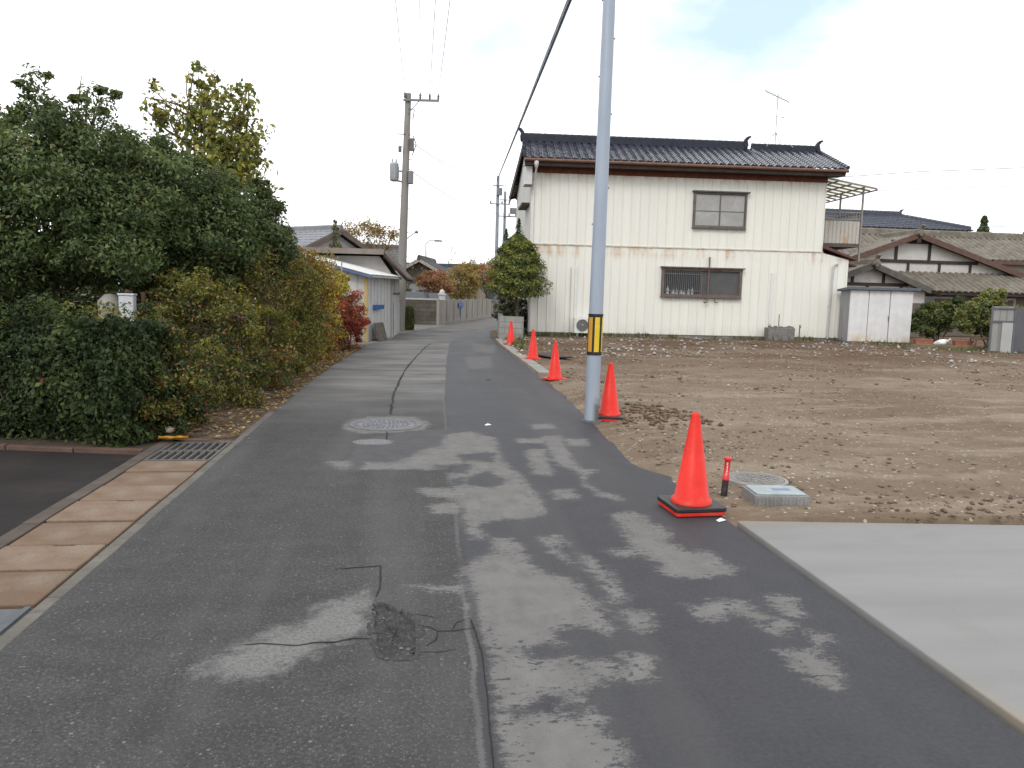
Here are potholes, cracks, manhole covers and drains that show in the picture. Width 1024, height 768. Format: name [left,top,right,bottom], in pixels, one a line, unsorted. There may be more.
drain grate [143,441,232,463]
manhole cover [348,418,422,431]
manhole cover [729,472,789,486]
crack [389,343,431,415]
pothole [366,600,425,662]
crack [340,565,382,598]
